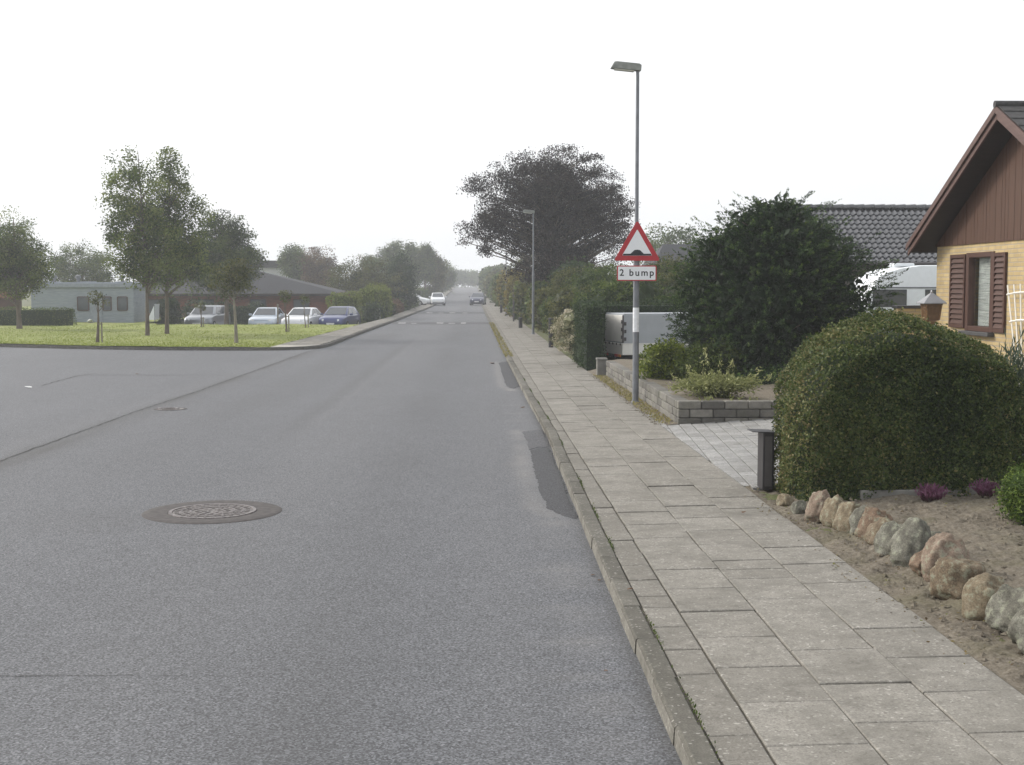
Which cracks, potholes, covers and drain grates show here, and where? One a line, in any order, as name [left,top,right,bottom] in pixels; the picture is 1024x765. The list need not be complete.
manhole cover [141,500,282,524]
